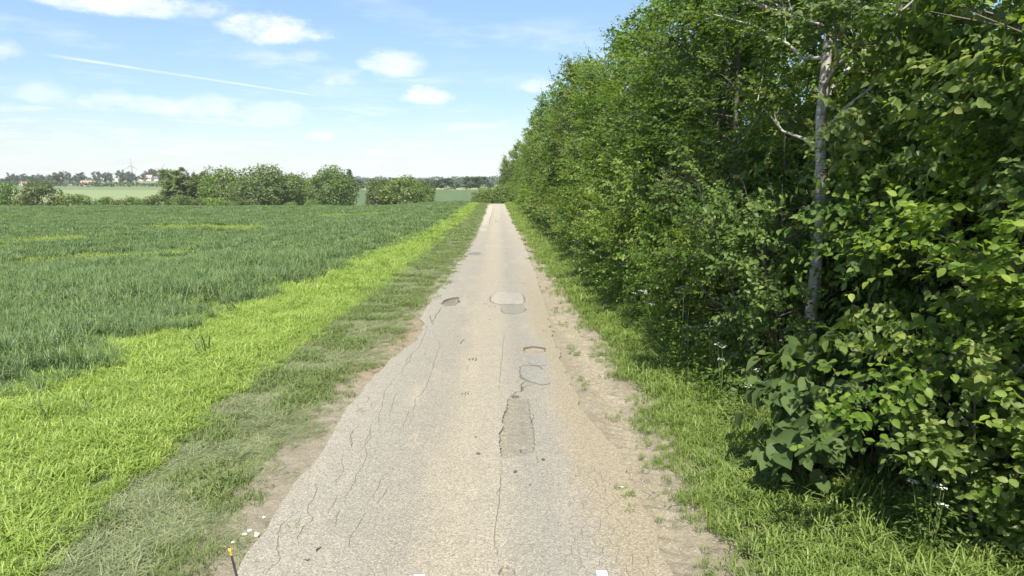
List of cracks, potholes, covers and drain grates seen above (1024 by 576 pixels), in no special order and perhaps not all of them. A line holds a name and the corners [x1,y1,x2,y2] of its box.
crack [499,339,546,422]
crack [493,462,502,564]
crack [266,309,477,574]
pothole [441,297,460,306]
pothole [523,346,546,354]
